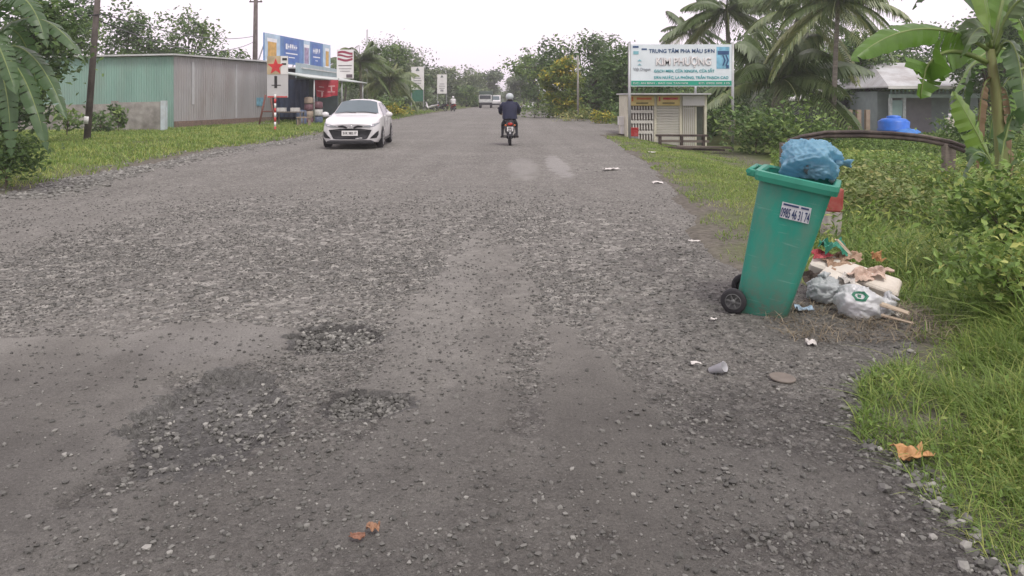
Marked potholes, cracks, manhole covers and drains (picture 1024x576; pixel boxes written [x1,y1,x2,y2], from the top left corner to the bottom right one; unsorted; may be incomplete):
pothole [108,366,301,483]
pothole [281,322,383,355]
pothole [319,388,421,422]
